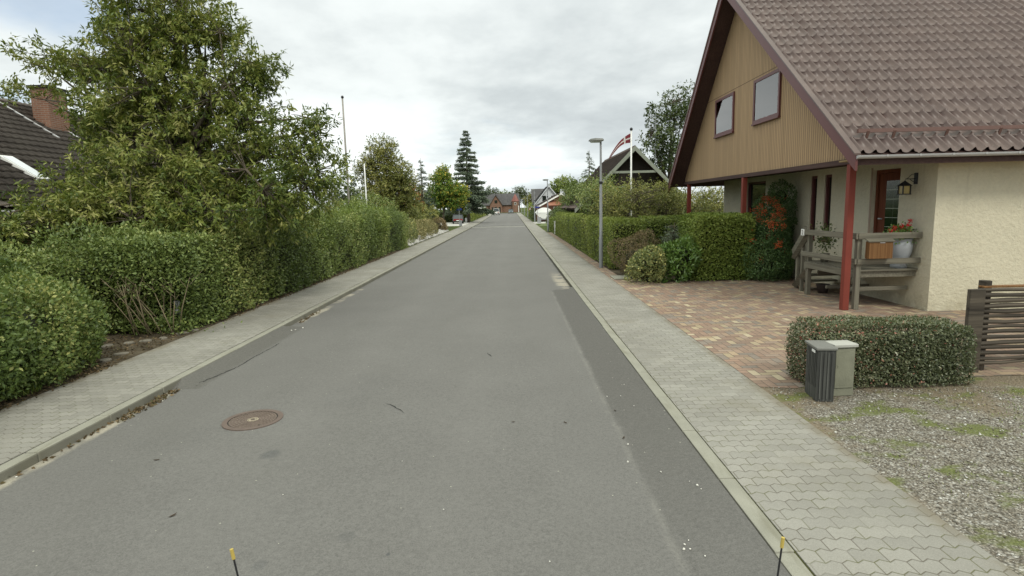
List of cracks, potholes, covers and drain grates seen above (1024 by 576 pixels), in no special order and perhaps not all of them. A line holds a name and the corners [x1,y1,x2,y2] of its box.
manhole cover [221,409,283,431]
